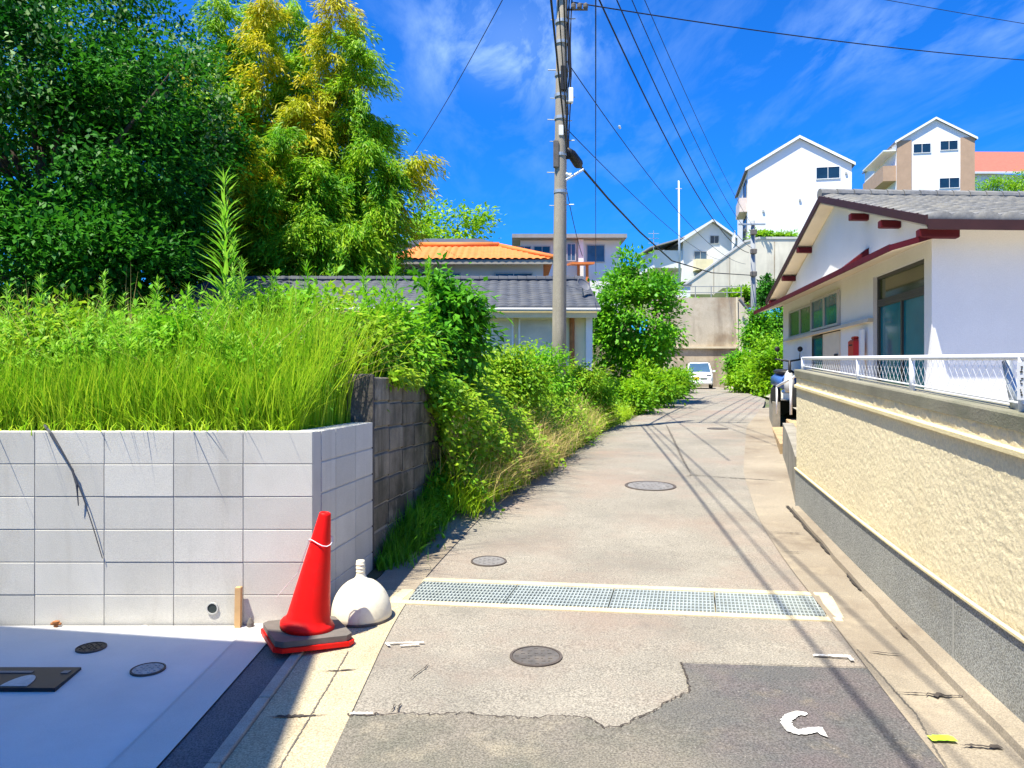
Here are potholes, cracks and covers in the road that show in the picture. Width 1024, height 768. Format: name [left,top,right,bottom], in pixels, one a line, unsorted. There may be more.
manhole cover [625,481,676,491]
manhole cover [129,662,166,677]
drain grate [390,578,844,622]
manhole cover [75,642,107,654]
manhole cover [471,556,507,567]
manhole cover [510,646,562,667]
